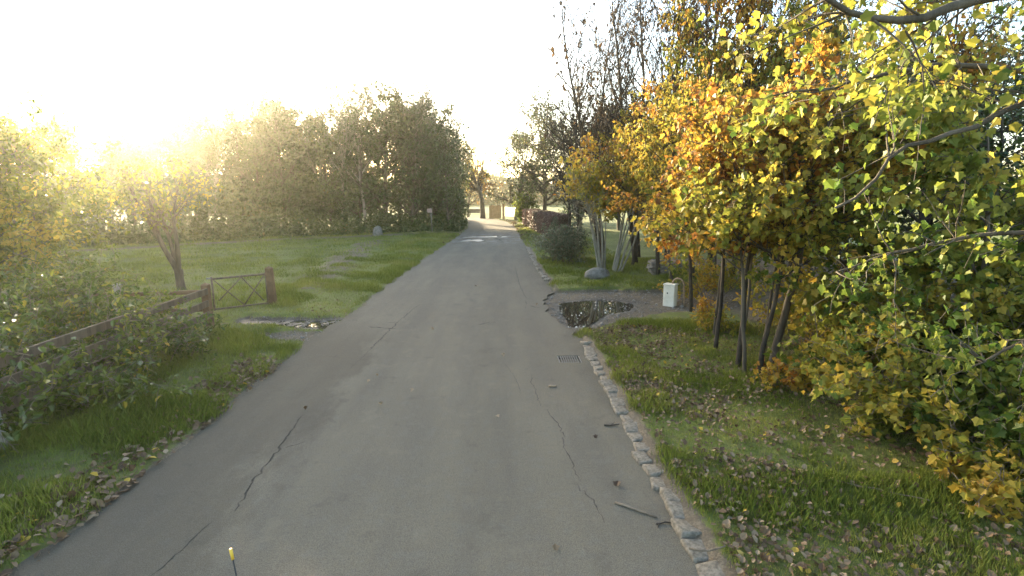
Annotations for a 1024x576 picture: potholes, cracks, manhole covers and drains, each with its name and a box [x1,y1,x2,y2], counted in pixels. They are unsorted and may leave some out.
crack [235,414,305,510]
crack [505,364,605,523]
crack [151,522,212,576]
drain grate [557,355,583,363]
crack [351,307,416,368]
